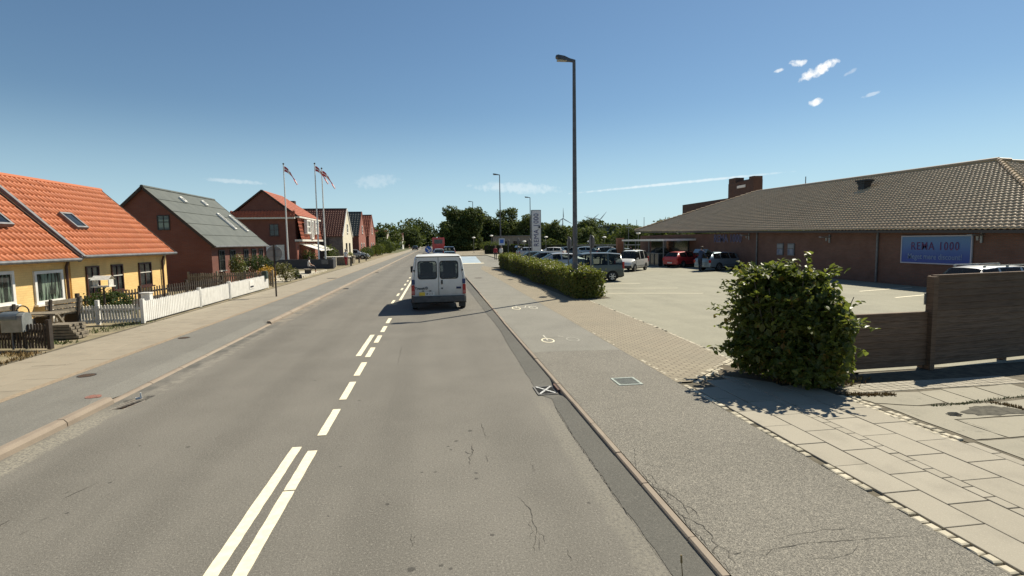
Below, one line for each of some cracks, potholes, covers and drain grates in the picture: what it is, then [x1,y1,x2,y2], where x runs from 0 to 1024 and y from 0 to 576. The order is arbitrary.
crack [757,528,904,558]
crack [634,449,741,570]
drain grate [533,384,560,396]
drain grate [110,393,146,410]
